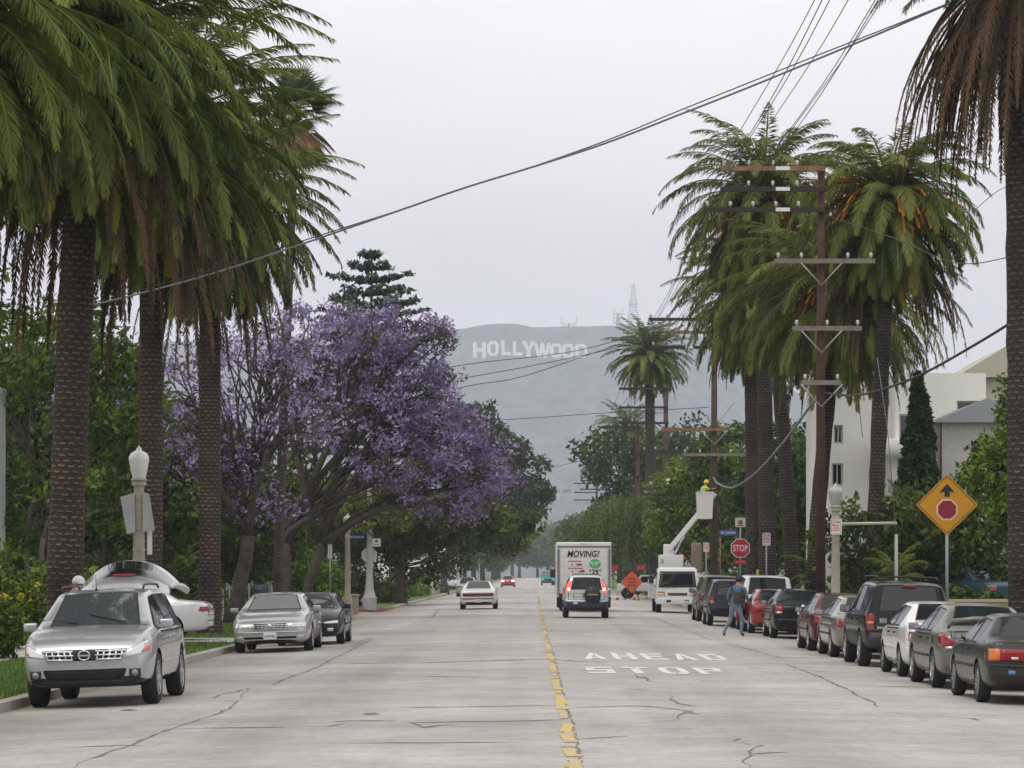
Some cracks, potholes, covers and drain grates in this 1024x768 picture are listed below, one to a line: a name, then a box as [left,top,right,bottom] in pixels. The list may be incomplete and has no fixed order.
crack [63,608,698,768]
crack [734,738,778,767]
crack [654,617,877,707]
